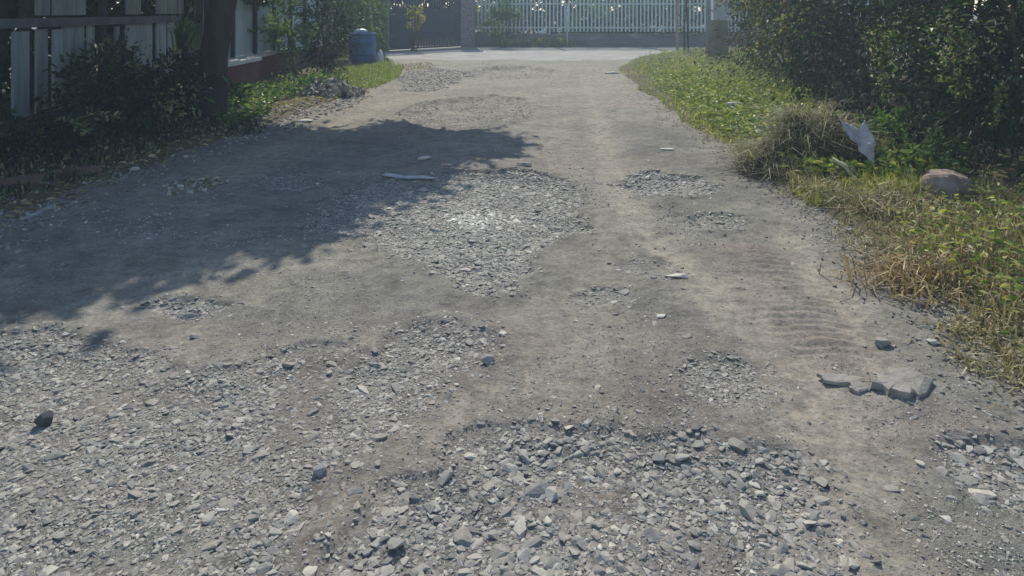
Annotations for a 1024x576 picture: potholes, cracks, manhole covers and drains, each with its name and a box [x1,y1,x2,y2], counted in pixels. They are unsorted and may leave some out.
pothole [395,94,540,131]
pothole [0,311,525,576]
pothole [293,406,889,576]
pothole [607,169,729,198]
pothole [119,291,245,322]
pothole [926,425,1024,525]
pothole [659,349,796,412]
pothole [683,211,760,231]
pothole [293,166,600,305]
